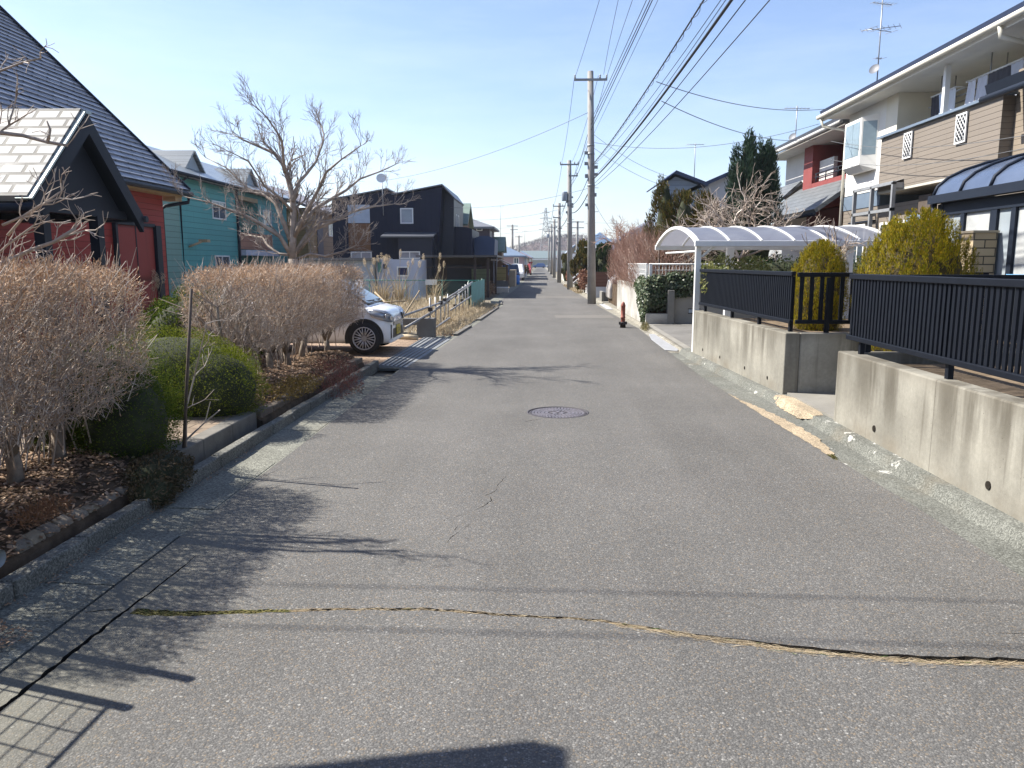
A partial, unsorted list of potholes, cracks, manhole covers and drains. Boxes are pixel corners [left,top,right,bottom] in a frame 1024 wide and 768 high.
manhole cover [527,406,589,418]
crack [0,556,1024,712]
